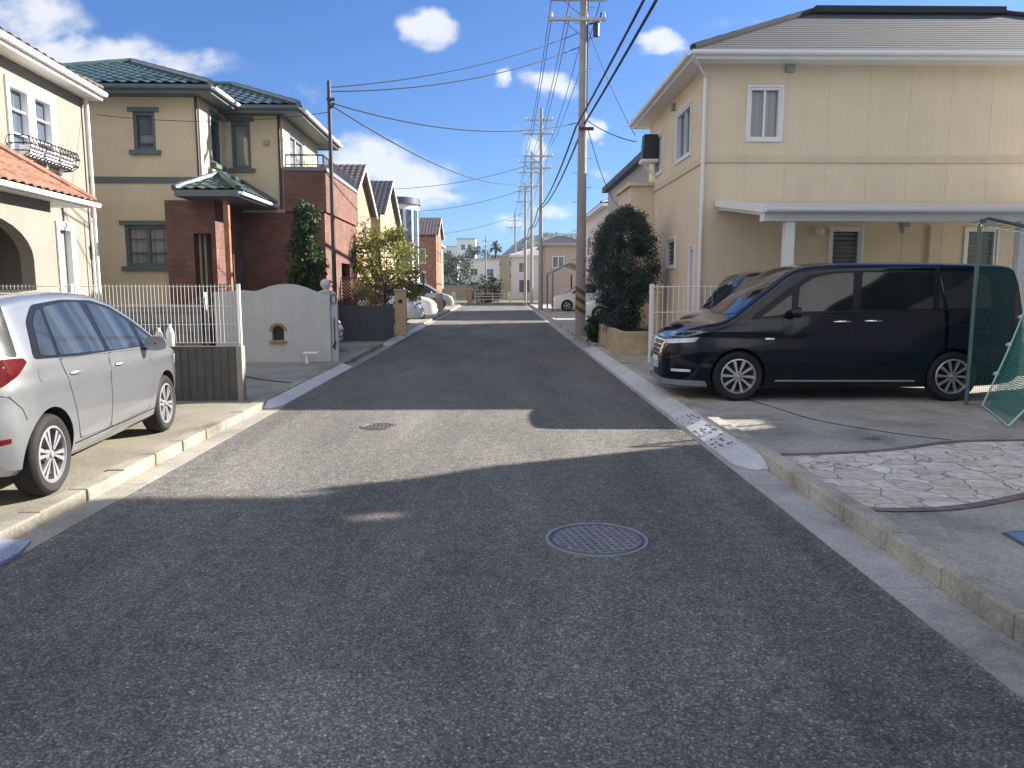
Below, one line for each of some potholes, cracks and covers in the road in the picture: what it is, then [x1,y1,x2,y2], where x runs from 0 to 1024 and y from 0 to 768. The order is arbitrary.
manhole cover [545,523,648,557]
